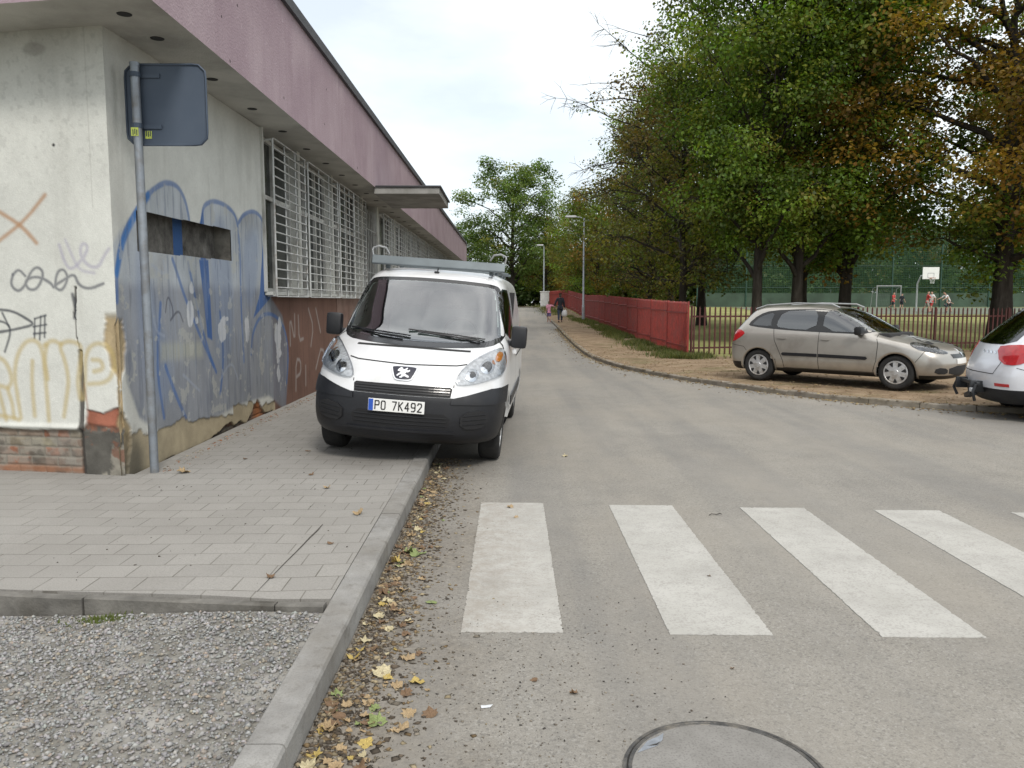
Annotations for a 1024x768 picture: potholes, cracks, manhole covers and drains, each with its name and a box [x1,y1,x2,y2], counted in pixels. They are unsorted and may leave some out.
manhole cover [623,721,824,768]
